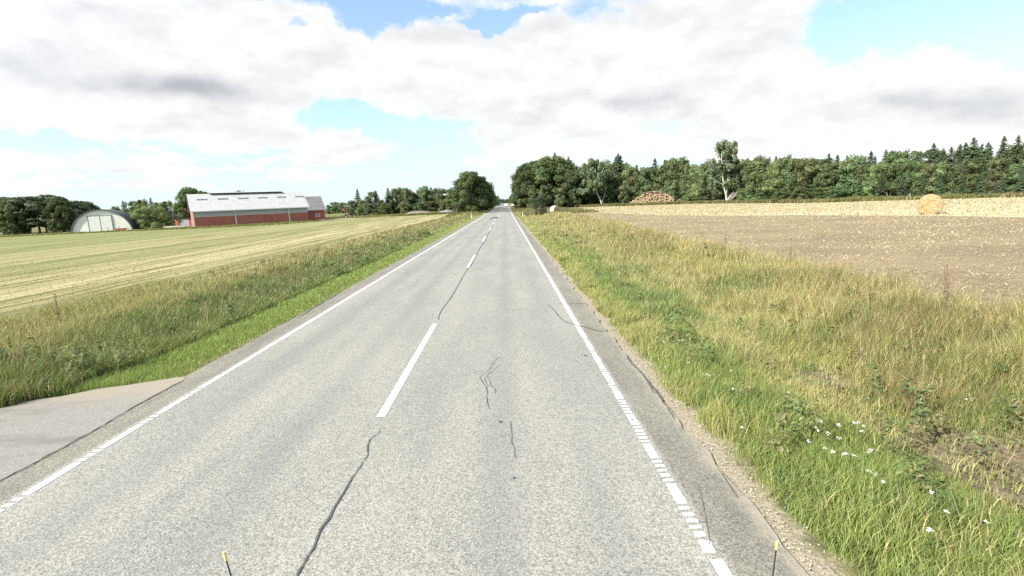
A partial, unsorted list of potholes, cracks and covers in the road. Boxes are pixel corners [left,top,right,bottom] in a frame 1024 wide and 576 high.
crack [625,353,684,439]
crack [438,225,493,320]
